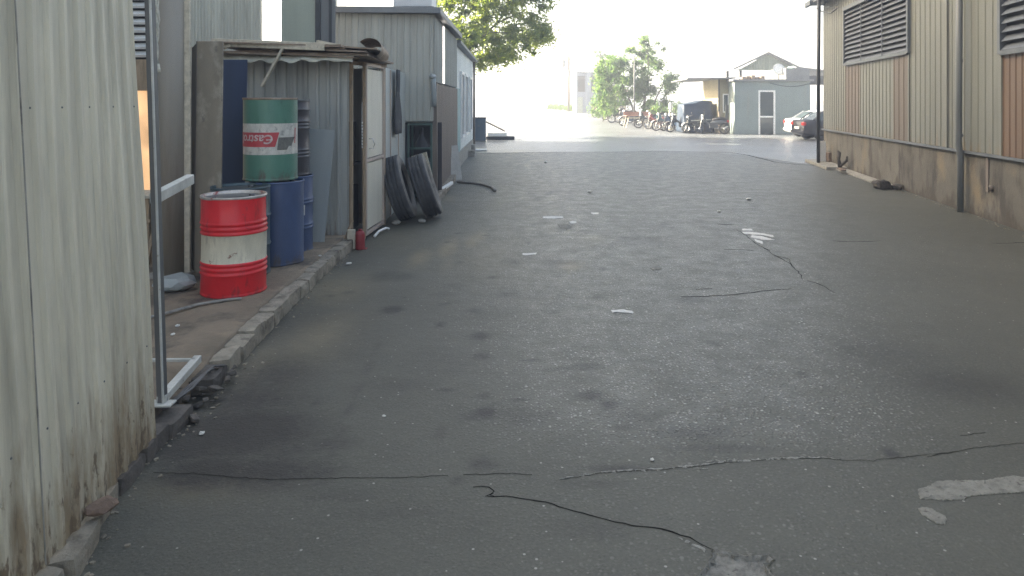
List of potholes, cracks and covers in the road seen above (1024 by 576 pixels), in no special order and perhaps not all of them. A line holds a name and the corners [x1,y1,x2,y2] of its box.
pothole [696,549,776,576]
crack [722,224,835,293]
crack [153,472,714,553]
crack [560,432,1016,480]
crack [683,288,781,297]
